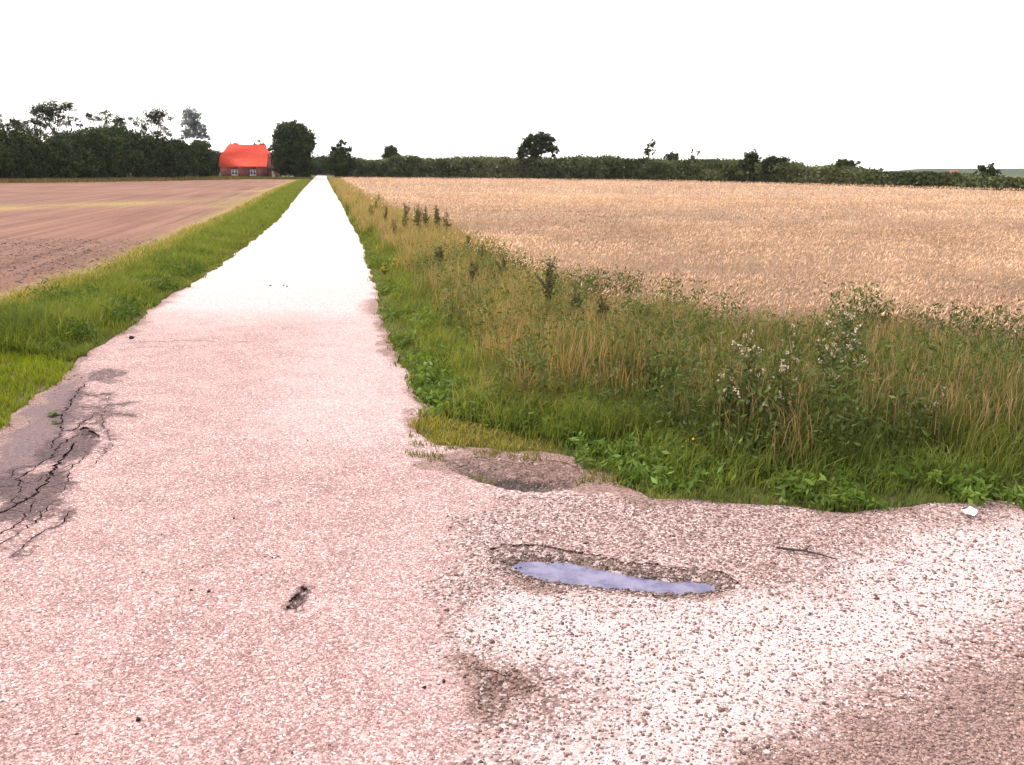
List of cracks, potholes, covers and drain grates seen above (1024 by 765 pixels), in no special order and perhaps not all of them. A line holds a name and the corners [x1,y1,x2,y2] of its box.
pothole [286,586,308,611]
pothole [488,543,740,600]
pothole [444,457,585,492]
